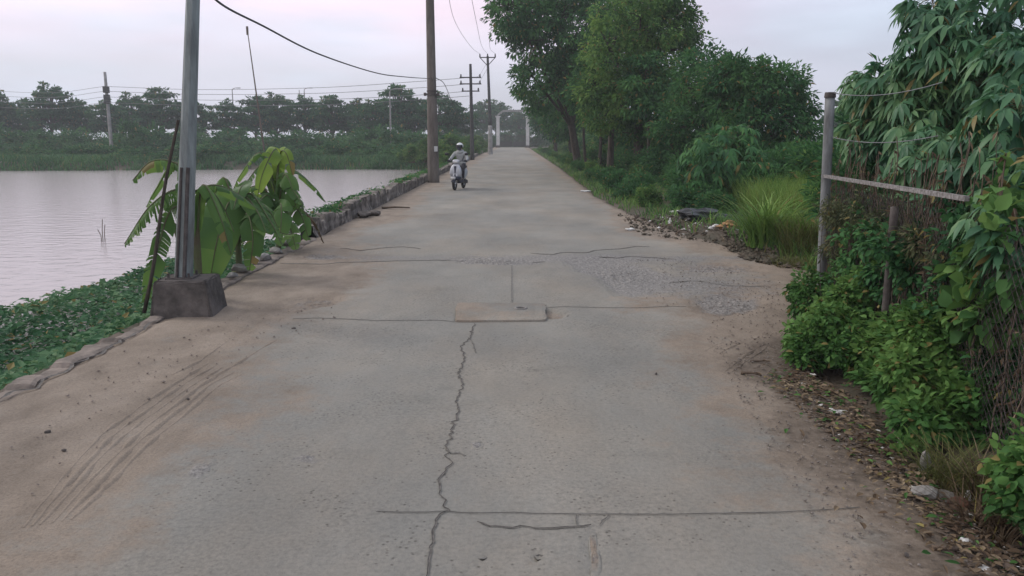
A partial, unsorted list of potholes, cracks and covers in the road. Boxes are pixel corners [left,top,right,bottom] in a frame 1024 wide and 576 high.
crack [534,246,664,259]
crack [426,324,476,576]
manhole cover [455,302,547,322]
crack [477,515,609,529]
